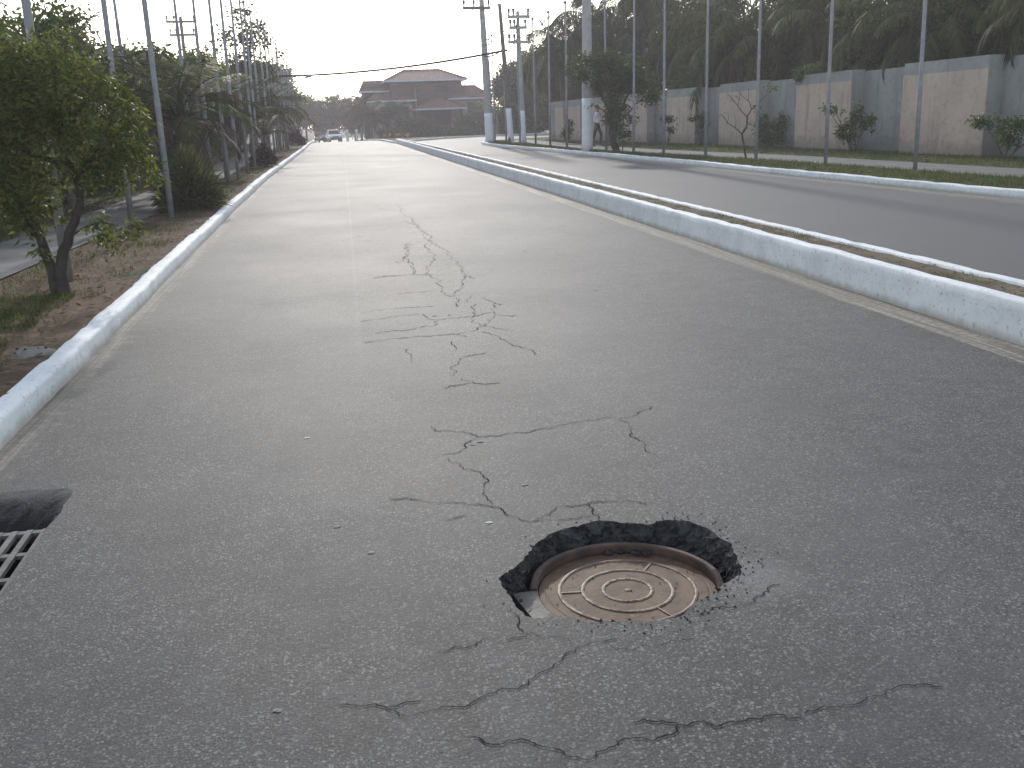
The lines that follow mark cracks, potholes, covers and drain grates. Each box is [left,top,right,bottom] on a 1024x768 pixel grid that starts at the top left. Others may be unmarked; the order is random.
manhole cover [513,542,724,622]
crack [392,407,656,522]
crack [466,683,943,761]
drain grate [0,488,73,595]
crack [341,613,696,717]
pothole [486,512,780,634]
